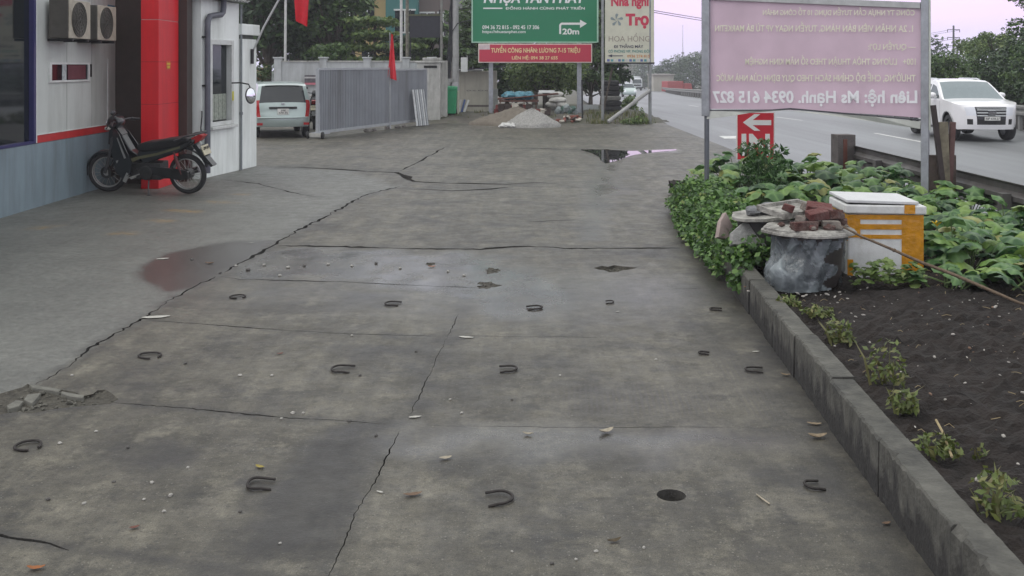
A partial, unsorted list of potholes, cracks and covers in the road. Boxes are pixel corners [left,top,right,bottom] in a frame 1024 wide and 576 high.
crack [0,534,68,550]
crack [35,147,749,428]
pothole [0,384,118,414]
pothole [657,489,686,501]
crack [329,435,398,575]
